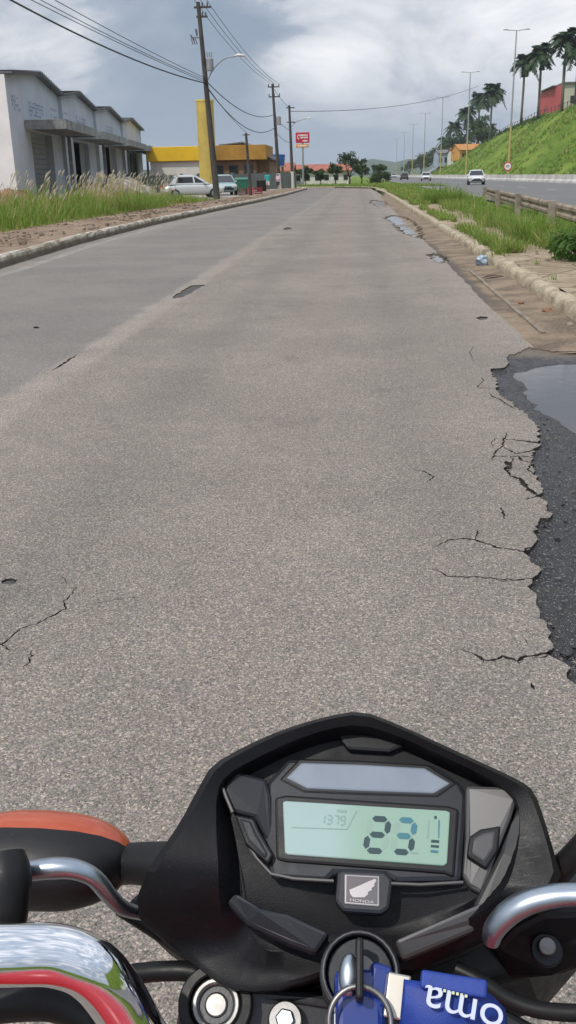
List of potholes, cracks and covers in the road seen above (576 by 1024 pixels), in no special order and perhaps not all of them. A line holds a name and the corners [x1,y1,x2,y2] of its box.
pothole [491,347,576,684]
pothole [425,253,449,263]
crack [461,638,548,665]
crack [431,569,533,582]
pothole [385,215,426,240]
crack [435,433,539,553]
pothole [173,285,205,299]
crack [0,576,77,671]
